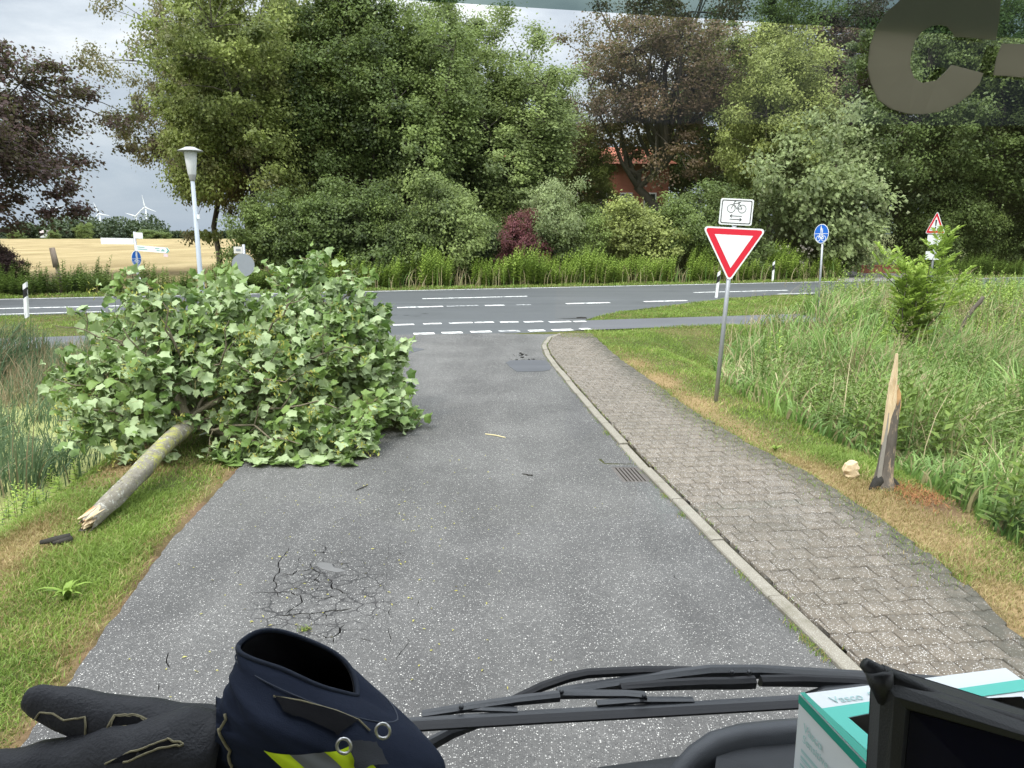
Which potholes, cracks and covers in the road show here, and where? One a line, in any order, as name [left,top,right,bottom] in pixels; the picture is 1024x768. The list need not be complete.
crack [273,547,345,644]
drain grate [611,467,651,482]
